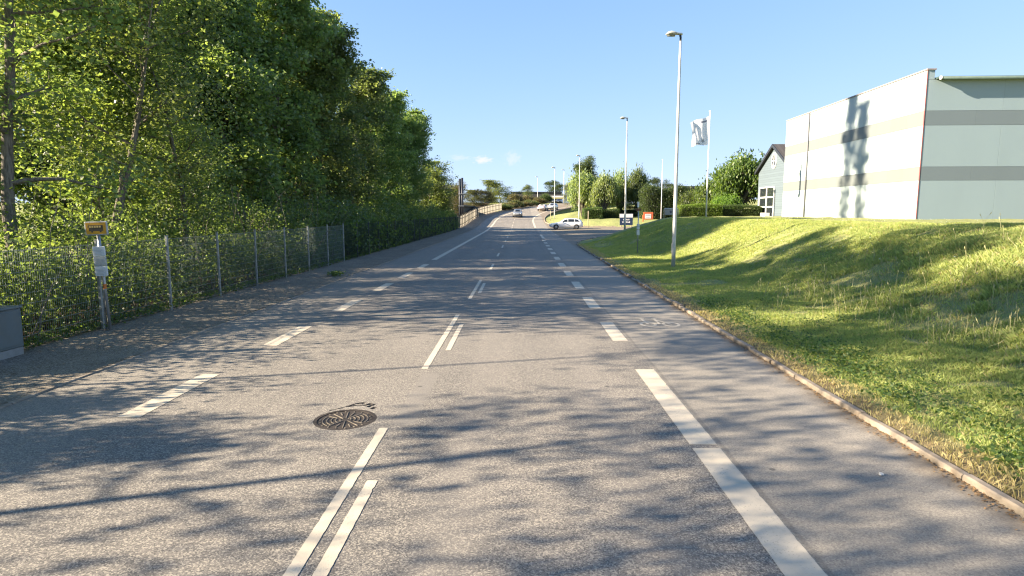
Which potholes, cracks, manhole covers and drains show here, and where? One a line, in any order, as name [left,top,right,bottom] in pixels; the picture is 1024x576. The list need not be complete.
manhole cover [313,409,377,430]
